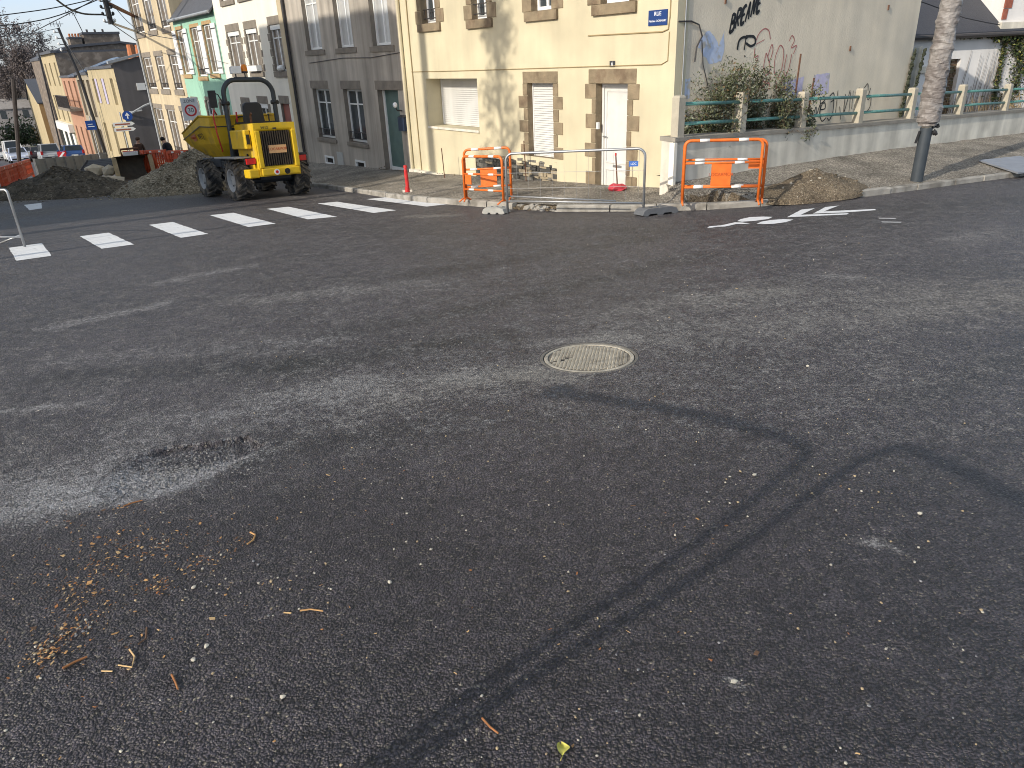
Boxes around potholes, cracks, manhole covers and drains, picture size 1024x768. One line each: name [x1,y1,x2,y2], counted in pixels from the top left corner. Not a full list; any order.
manhole cover [540,342,639,374]
pothole [92,435,265,506]
